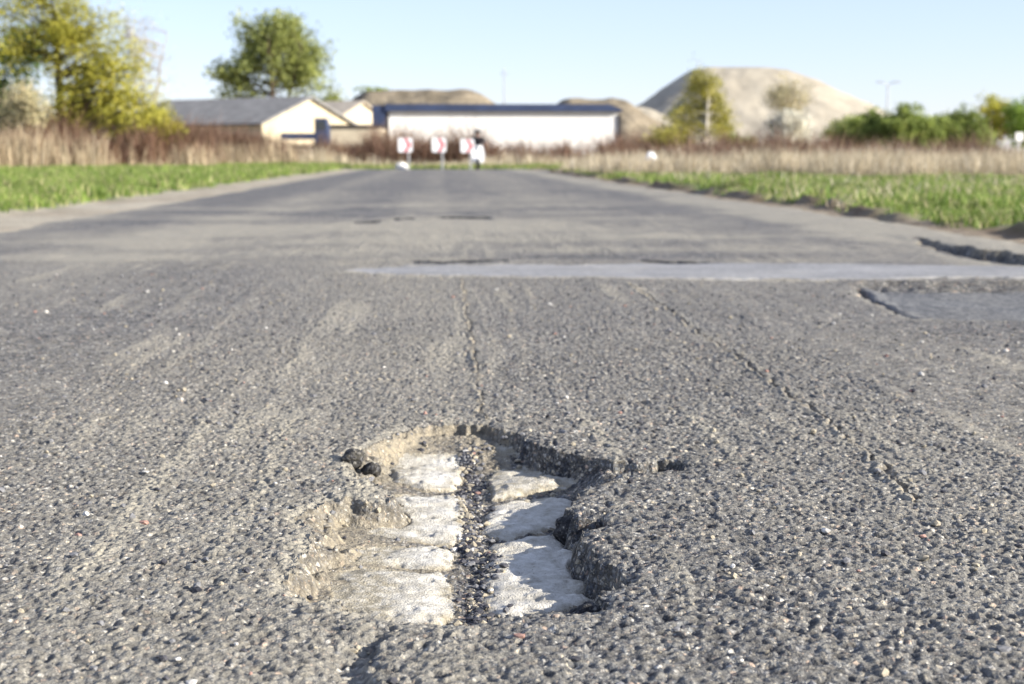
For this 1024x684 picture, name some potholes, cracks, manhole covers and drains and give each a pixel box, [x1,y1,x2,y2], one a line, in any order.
crack [628,282,924,503]
pothole [283,423,694,626]
crack [414,259,509,421]
